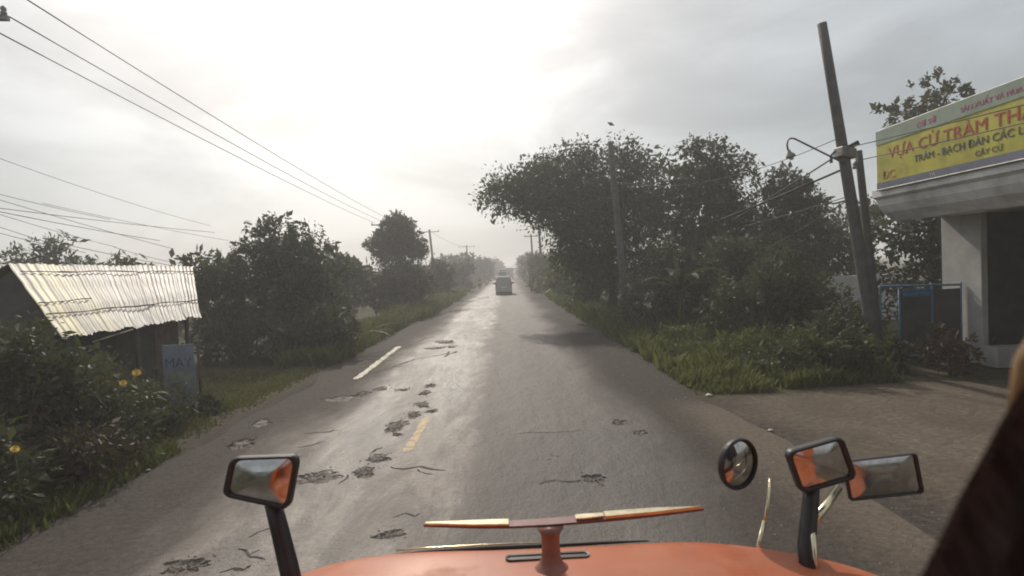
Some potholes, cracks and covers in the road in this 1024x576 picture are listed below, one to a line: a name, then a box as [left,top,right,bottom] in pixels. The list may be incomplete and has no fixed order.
pothole [219,436,262,451]
pothole [384,418,410,434]
pothole [370,529,407,540]
pothole [320,393,359,402]
pothole [296,466,344,487]
pothole [360,453,397,463]
pothole [248,418,273,428]
pothole [149,554,220,576]
crack [369,447,446,475]
pothole [580,472,607,488]
pothole [351,463,380,479]
